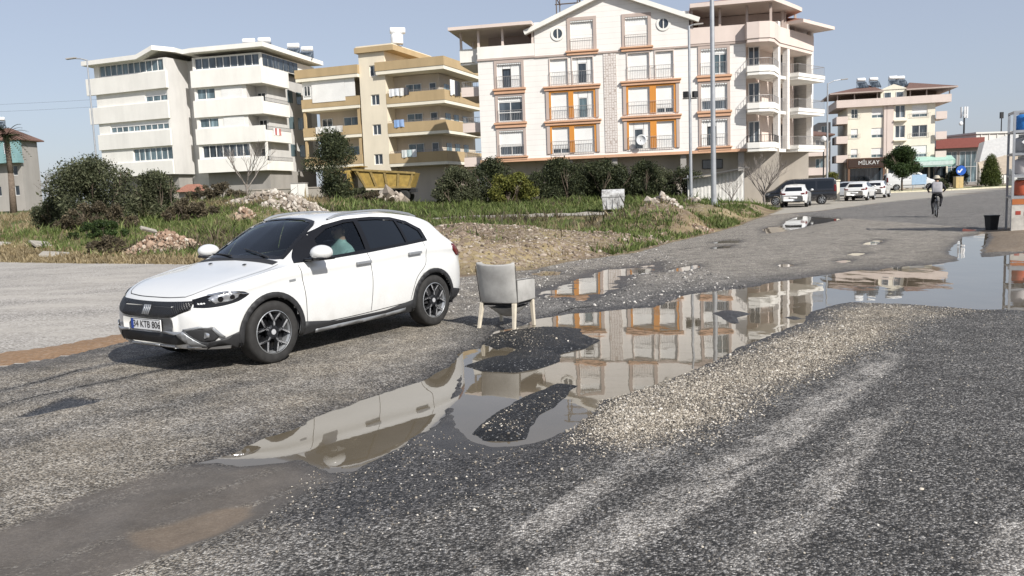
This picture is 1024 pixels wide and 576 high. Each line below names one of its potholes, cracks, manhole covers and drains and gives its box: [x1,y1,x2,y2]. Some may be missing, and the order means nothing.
pothole [943,232,996,260]
pothole [181,360,464,475]
pothole [446,251,1024,450]
pothole [760,215,843,234]
